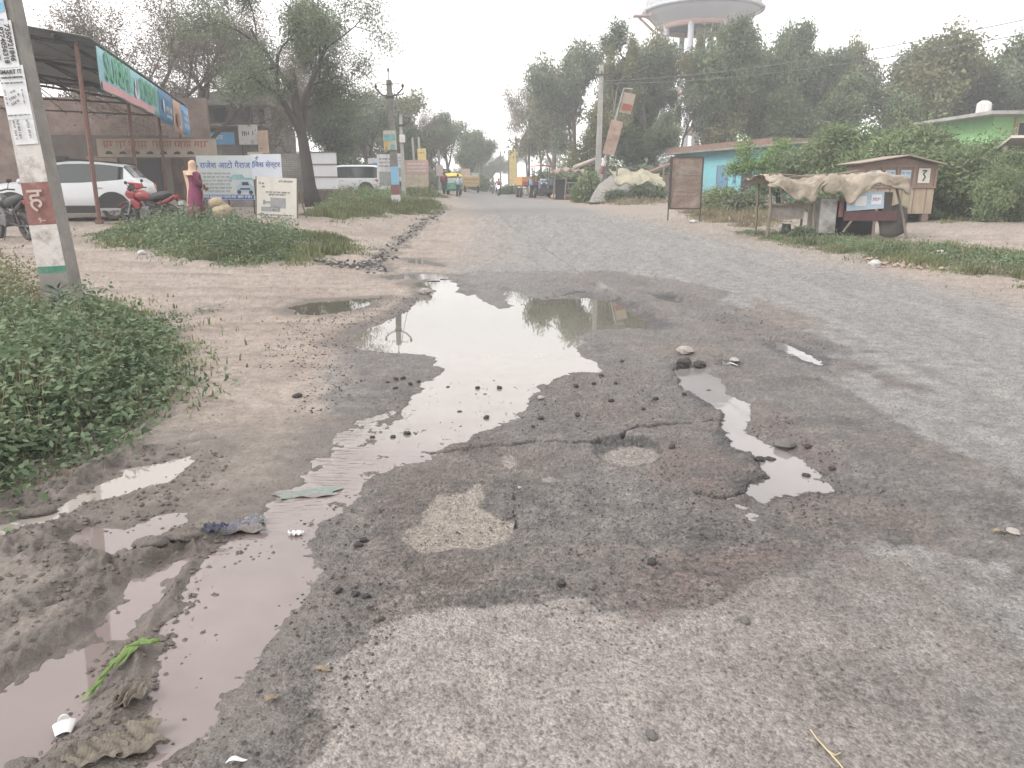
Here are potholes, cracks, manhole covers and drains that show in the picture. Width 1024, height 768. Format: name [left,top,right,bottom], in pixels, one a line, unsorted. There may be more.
pothole [664,362,855,507]
crack [620,419,721,439]
pothole [769,339,829,366]
pothole [337,278,662,457]
crack [427,437,602,455]
pothole [591,434,665,468]
